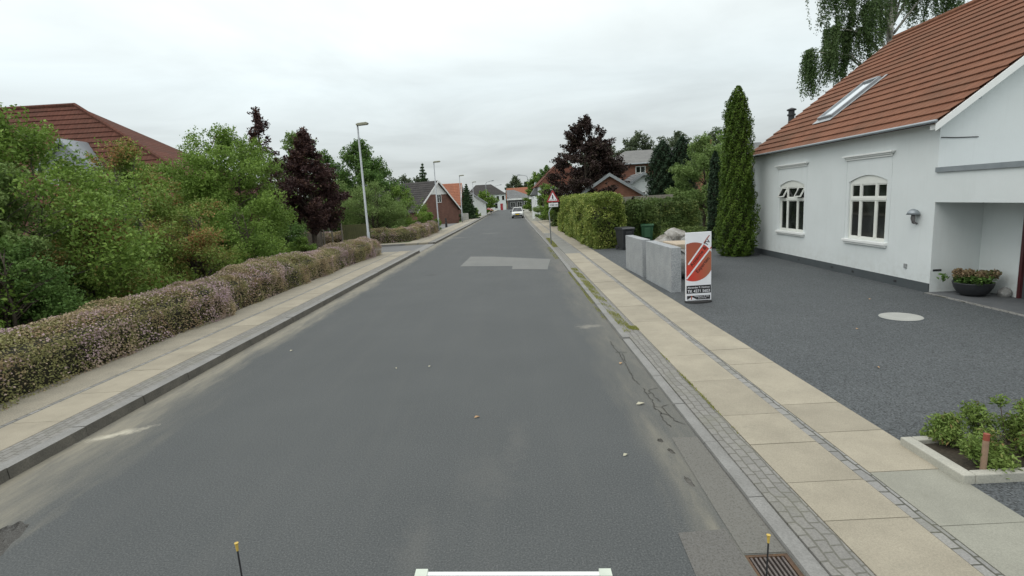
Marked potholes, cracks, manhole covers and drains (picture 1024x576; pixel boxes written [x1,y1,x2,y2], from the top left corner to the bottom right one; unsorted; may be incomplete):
pothole [0,521,30,556]
manhole cover [876,312,927,321]
crack [610,341,683,426]
drain grate [744,553,804,576]
